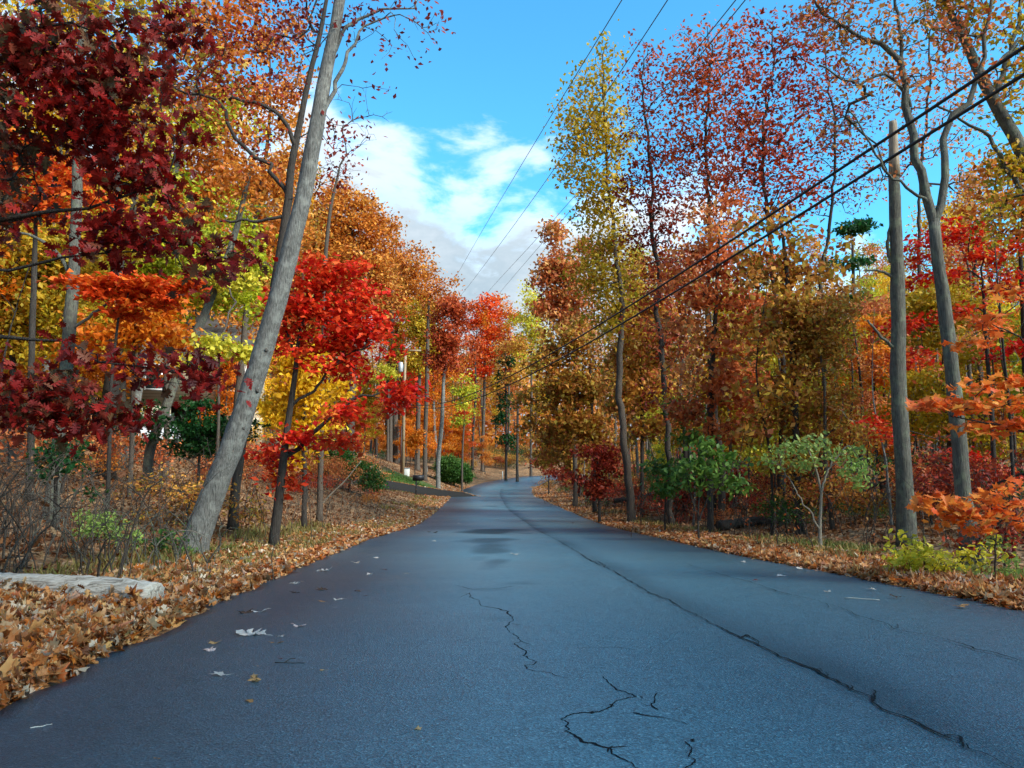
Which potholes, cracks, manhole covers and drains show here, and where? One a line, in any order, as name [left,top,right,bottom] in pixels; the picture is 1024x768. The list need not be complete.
crack [457,585,562,677]
crack [501,497,1014,768]
